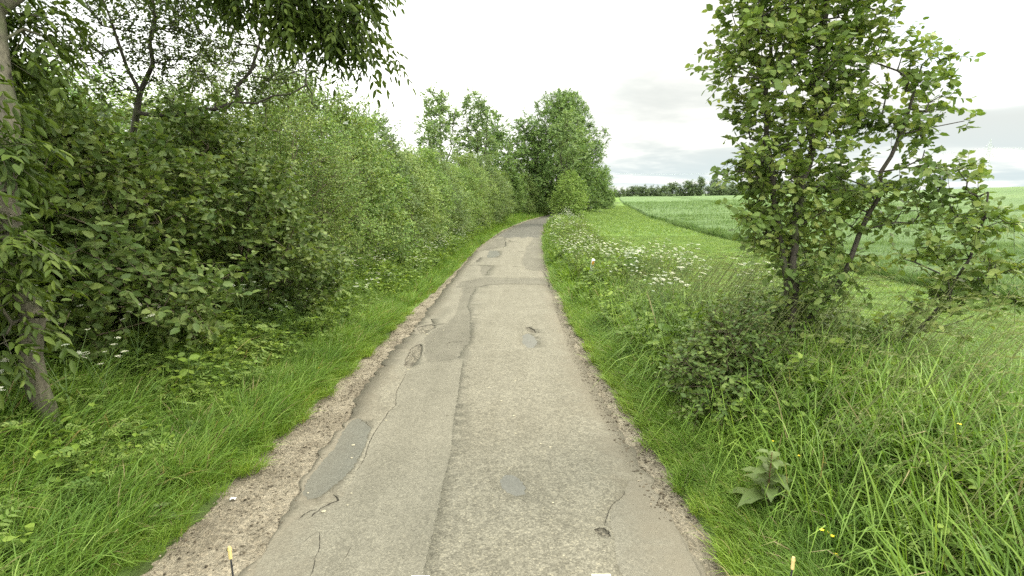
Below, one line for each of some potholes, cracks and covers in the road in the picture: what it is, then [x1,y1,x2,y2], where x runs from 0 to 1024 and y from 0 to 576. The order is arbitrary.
pothole [405,344,422,368]
crack [298,494,339,576]
